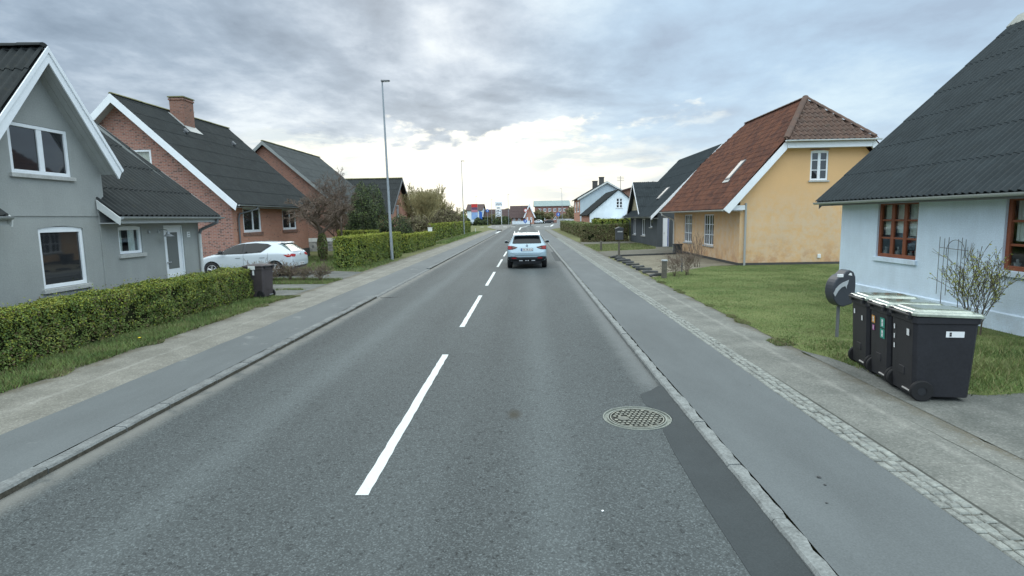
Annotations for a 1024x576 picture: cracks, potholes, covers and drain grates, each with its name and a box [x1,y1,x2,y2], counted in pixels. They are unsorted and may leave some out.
manhole cover [603,406,672,430]
